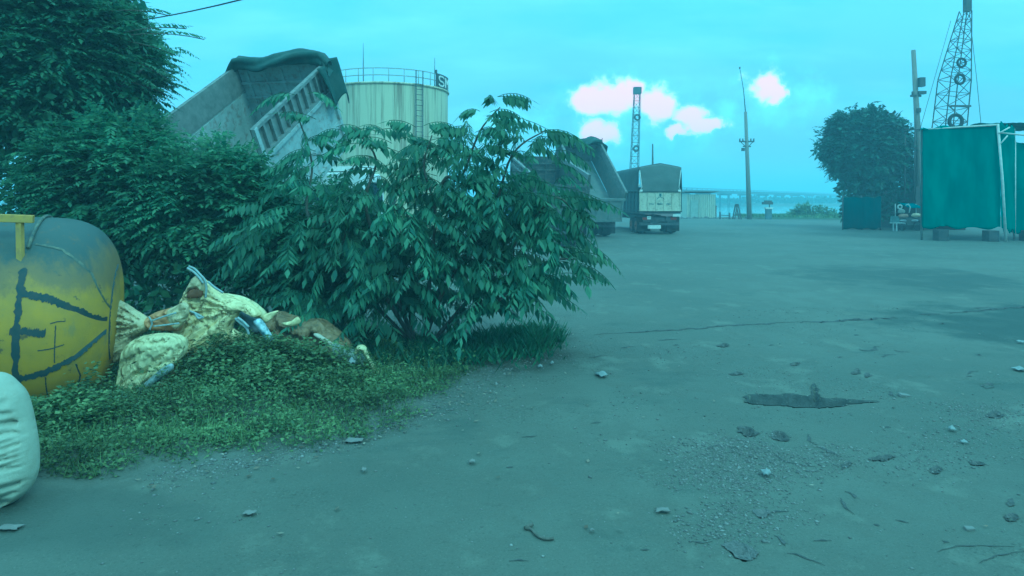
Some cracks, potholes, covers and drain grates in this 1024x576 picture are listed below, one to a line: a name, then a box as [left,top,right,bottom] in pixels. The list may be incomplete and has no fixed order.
crack [938,541,1024,563]
pothole [743,383,880,409]
